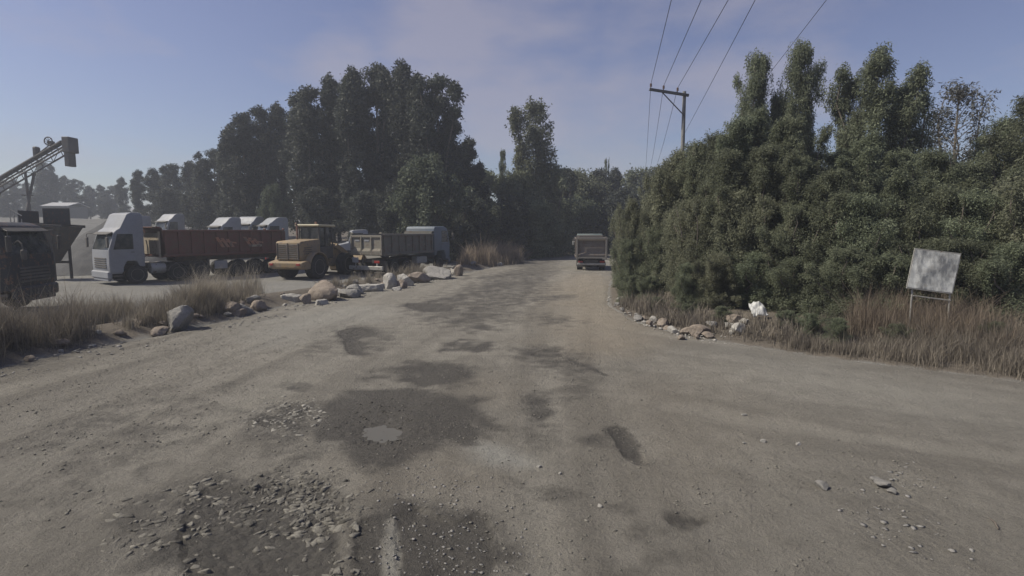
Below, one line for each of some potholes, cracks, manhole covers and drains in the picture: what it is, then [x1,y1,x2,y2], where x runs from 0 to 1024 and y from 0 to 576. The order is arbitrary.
pothole [174,480,349,576]
pothole [607,425,648,466]
pothole [338,410,433,452]
pothole [665,513,713,529]
pothole [338,327,377,355]
pothole [254,403,319,429]
